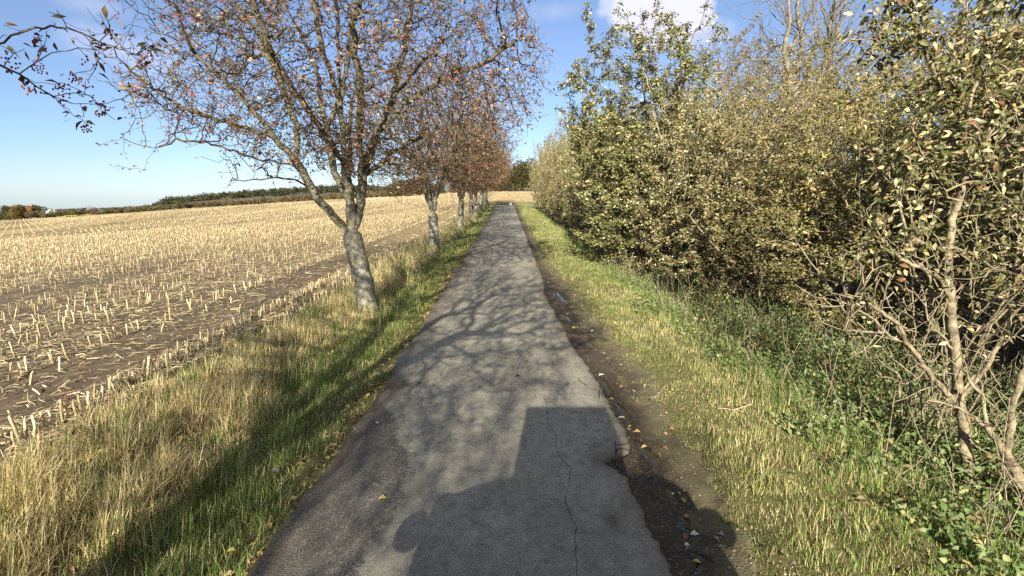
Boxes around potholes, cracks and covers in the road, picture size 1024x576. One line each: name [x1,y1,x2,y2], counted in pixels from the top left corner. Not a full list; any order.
crack [546,407,577,575]
